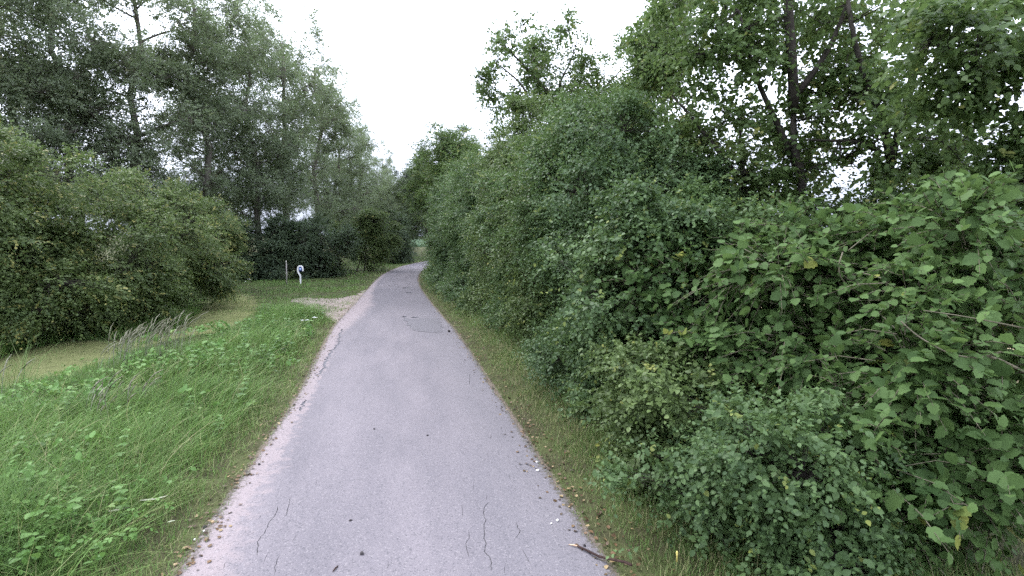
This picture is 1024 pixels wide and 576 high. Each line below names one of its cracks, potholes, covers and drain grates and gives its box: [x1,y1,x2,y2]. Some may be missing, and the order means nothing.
crack [257,499,294,572]
crack [316,329,343,377]
crack [462,497,529,573]
